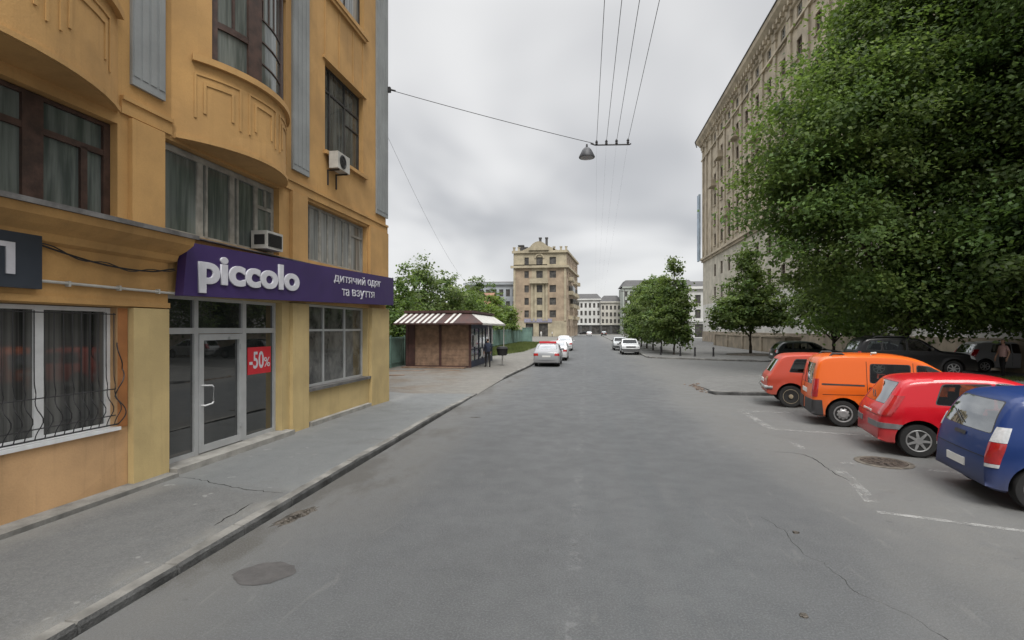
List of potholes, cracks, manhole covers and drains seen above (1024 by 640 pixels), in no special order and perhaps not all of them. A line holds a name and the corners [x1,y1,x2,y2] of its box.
crack [761,517,948,640]
crack [183,477,280,525]
manhole cover [853,456,915,469]
